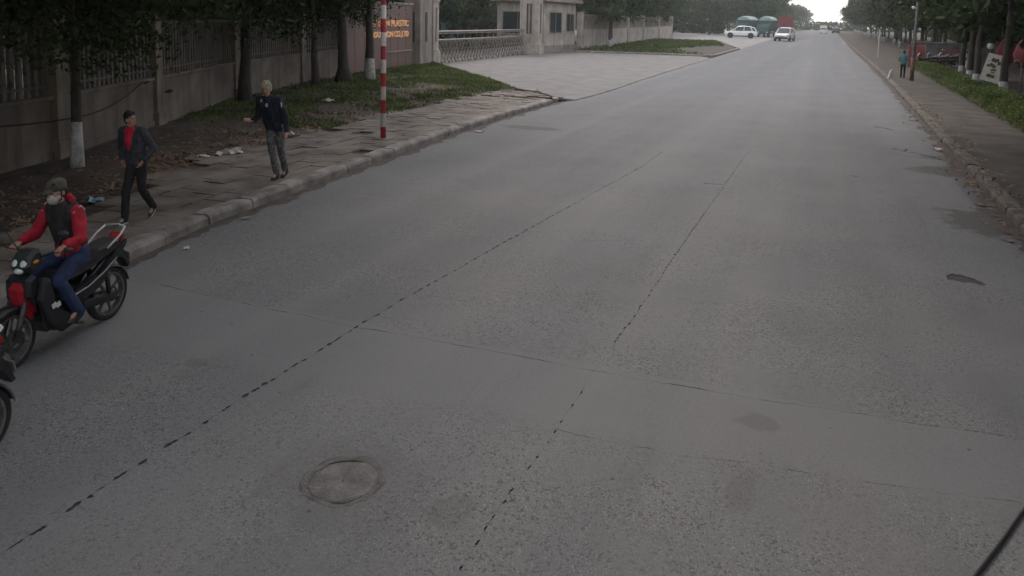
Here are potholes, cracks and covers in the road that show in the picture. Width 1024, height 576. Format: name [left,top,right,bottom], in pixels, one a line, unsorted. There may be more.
manhole cover [298,455,386,509]
pothole [946,274,986,286]
